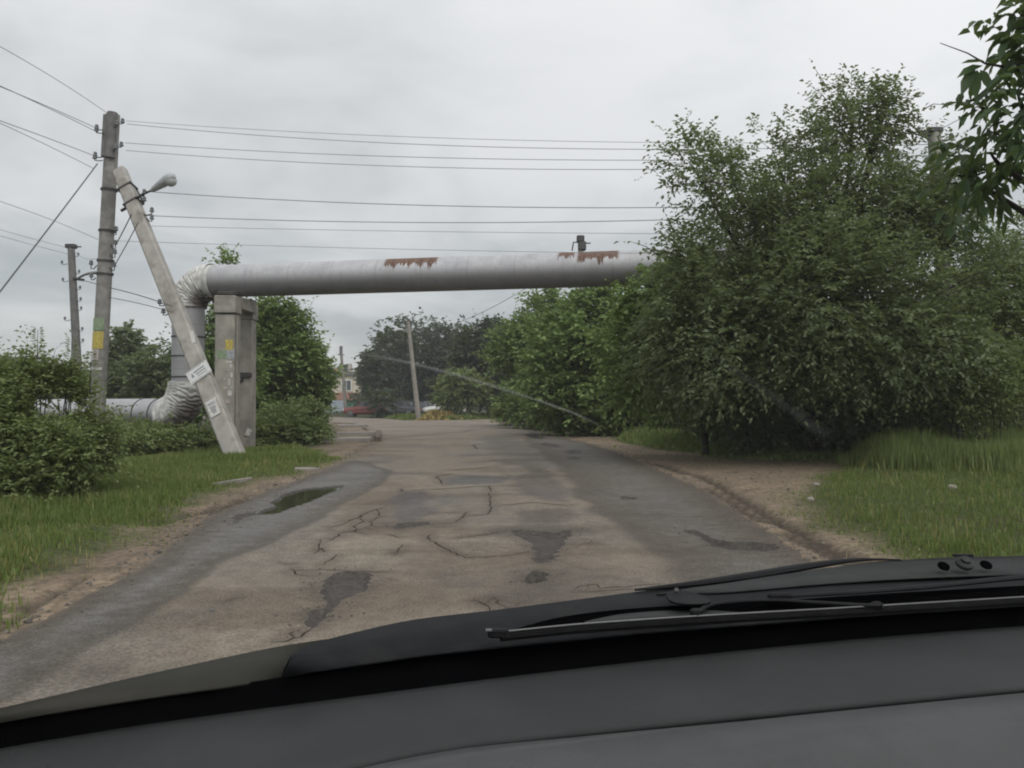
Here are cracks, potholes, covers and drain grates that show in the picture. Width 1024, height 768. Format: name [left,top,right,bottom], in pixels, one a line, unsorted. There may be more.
crack [427,493,520,558]
pothole [257,485,343,515]
pothole [304,571,374,629]
crack [290,507,403,589]
pothole [522,570,551,585]
pothole [508,529,572,564]
